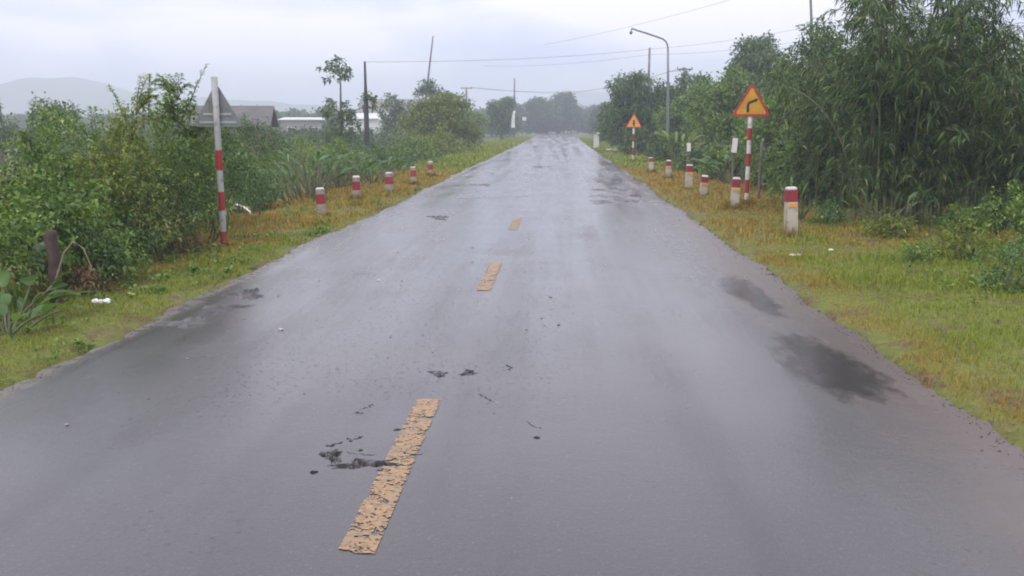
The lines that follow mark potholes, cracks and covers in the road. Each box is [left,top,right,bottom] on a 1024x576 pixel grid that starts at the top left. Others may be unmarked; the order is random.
pothole [328,458,396,470]
pothole [318,449,342,464]
